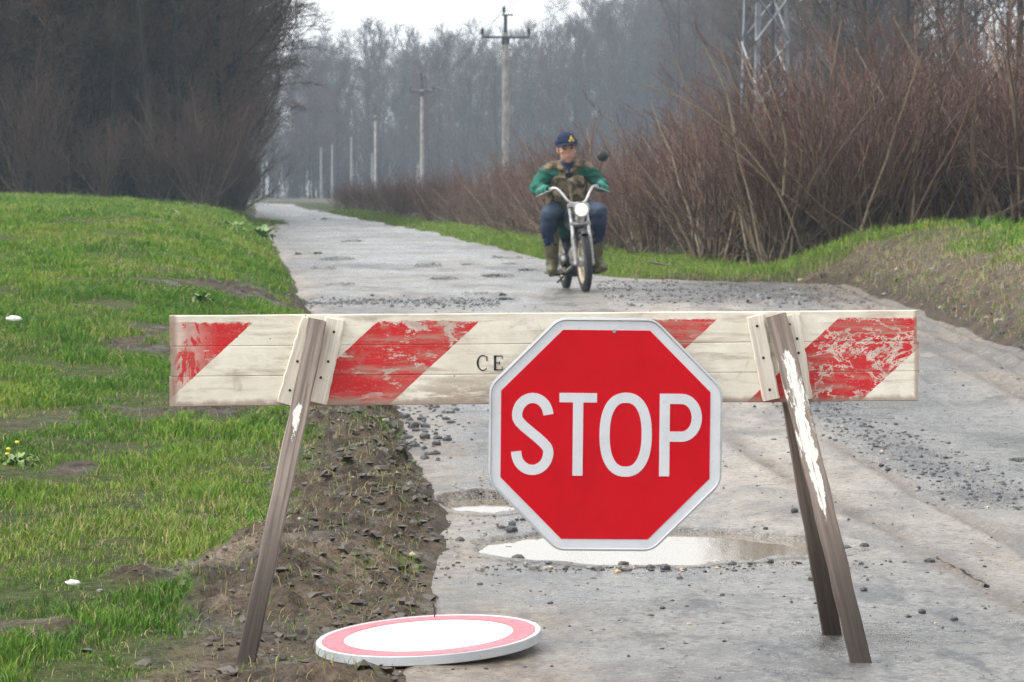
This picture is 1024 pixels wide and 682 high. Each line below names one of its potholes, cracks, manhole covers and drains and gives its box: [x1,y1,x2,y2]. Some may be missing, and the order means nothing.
pothole [451,526,879,568]
crack [933,556,990,587]
pothole [434,487,519,517]
